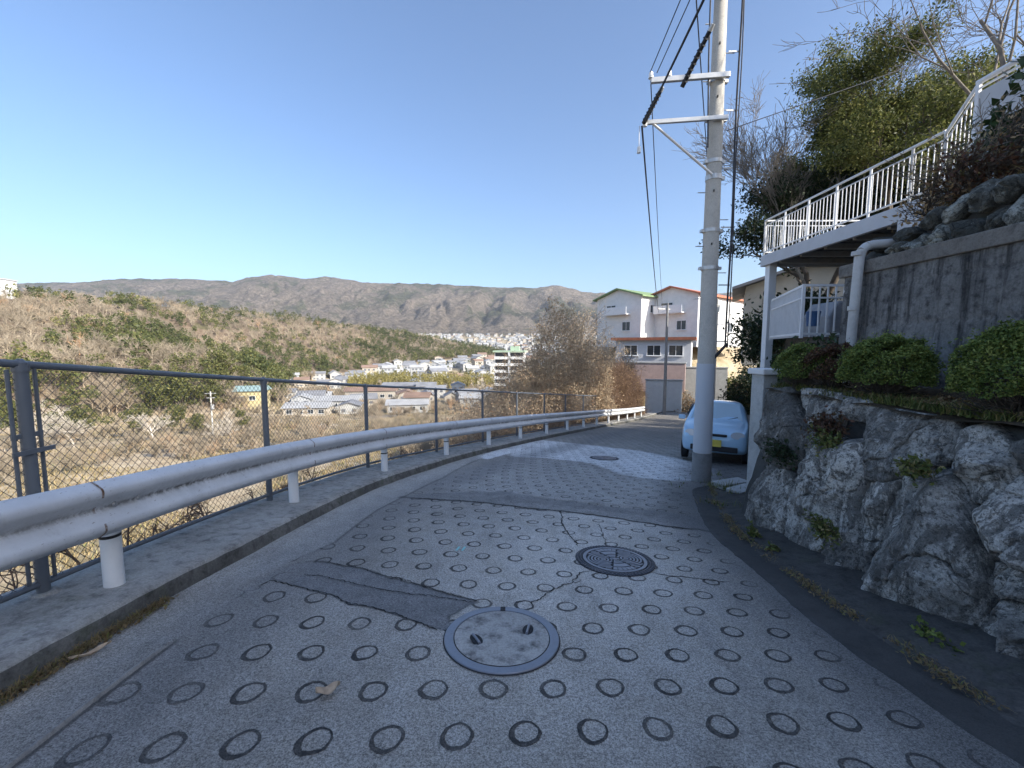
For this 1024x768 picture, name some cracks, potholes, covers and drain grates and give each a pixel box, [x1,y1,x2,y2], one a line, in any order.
manhole cover [575,545,656,577]
crack [530,571,589,605]
manhole cover [443,607,560,676]
